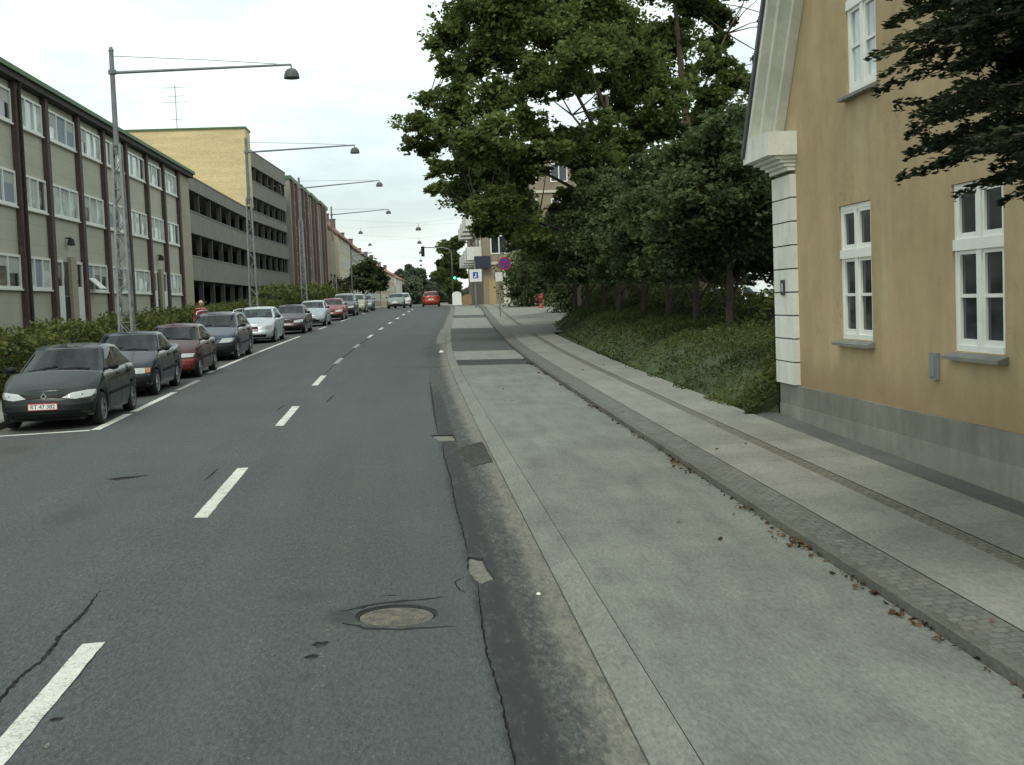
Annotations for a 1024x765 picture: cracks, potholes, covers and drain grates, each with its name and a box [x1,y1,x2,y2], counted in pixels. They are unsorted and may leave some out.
manhole cover [355,604,438,626]
crack [430,382,469,555]
crack [0,591,100,702]
pothole [467,556,495,584]
